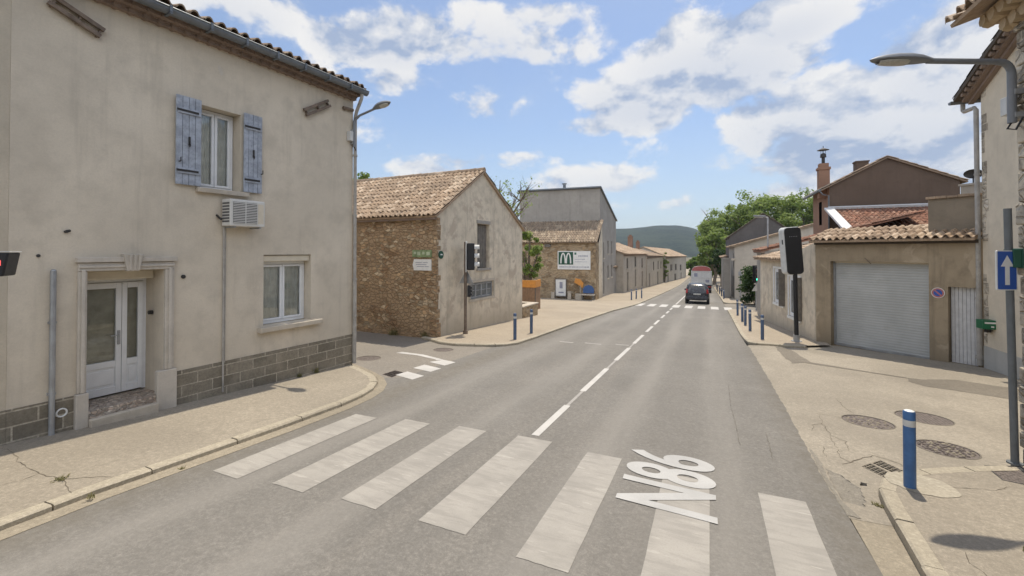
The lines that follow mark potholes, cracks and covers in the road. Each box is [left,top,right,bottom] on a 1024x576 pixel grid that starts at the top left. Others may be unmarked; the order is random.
utility cover [984,465,1024,485]
manhole cover [894,410,955,426]
crack [8,449,105,493]
drain grate [860,460,903,478]
crack [812,402,903,466]
manhole cover [916,439,982,460]
manhole cover [841,414,896,430]
